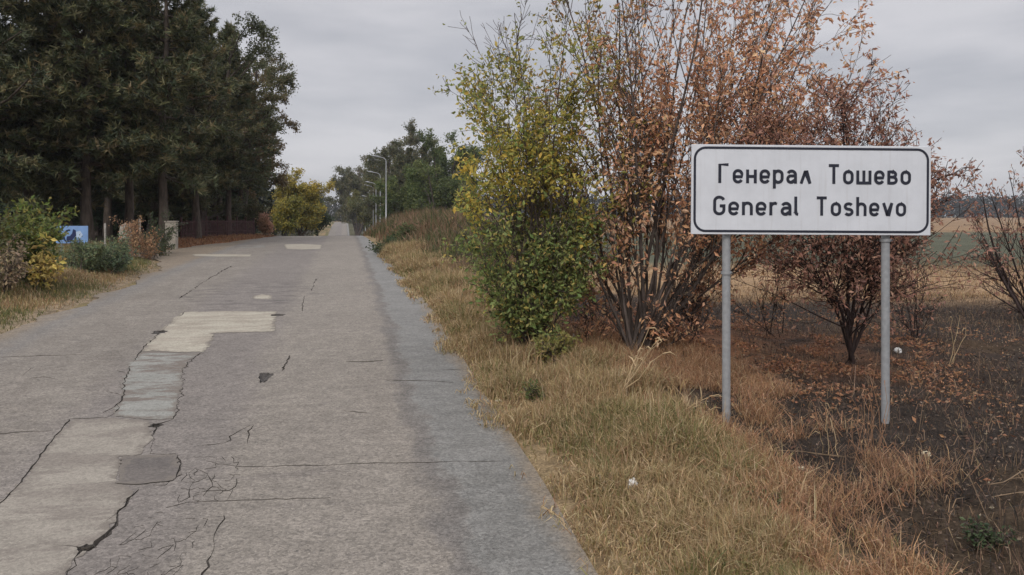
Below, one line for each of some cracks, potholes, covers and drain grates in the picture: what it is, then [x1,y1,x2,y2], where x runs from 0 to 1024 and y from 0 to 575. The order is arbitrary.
crack [0,266,487,575]
